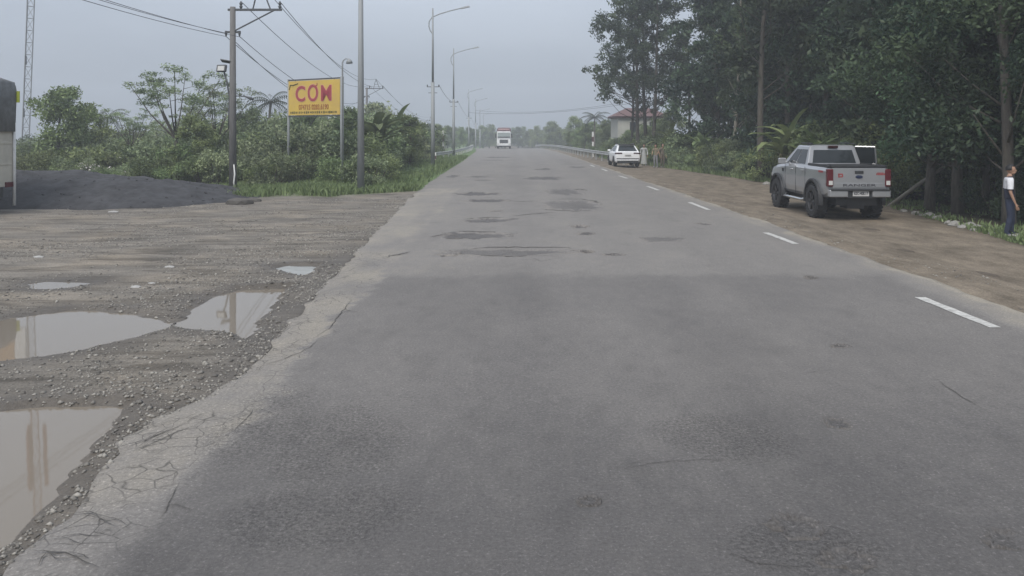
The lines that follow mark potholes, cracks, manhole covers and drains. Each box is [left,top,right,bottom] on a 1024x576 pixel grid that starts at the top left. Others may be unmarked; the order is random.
crack [112,414,216,453]
crack [35,501,146,566]
crack [255,303,356,371]
